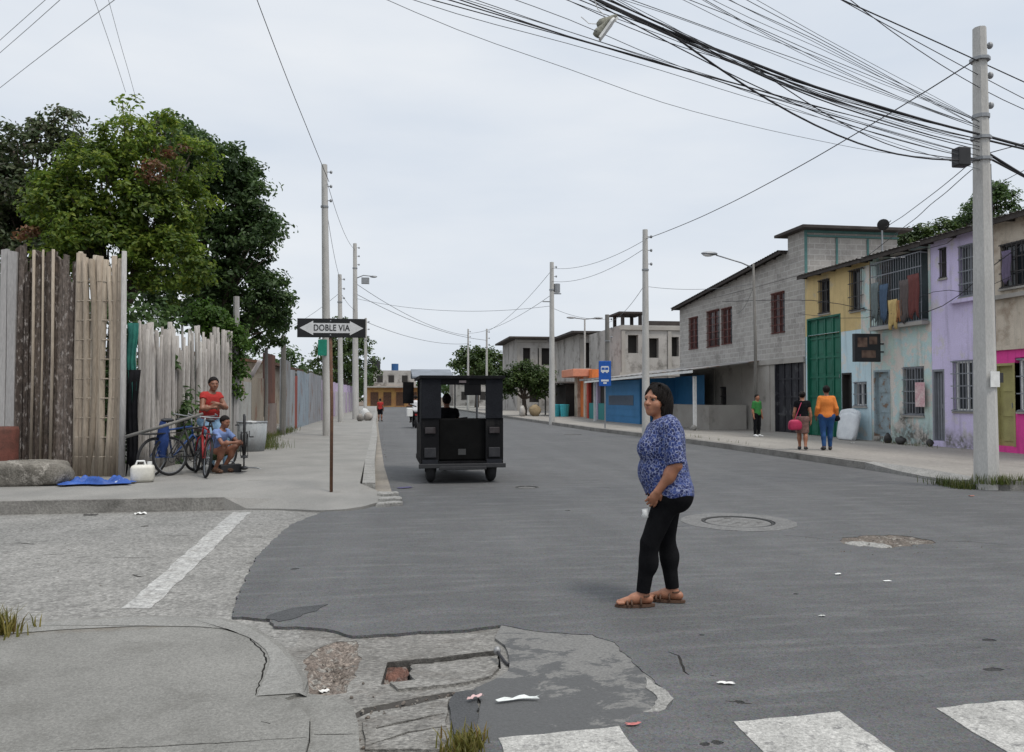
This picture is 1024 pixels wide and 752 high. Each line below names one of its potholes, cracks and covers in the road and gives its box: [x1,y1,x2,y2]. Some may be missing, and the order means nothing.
crack [250,638,267,695]
crack [669,652,688,675]
manhole cover [680,513,797,531]
pothole [841,535,935,548]
pothole [303,642,362,695]
